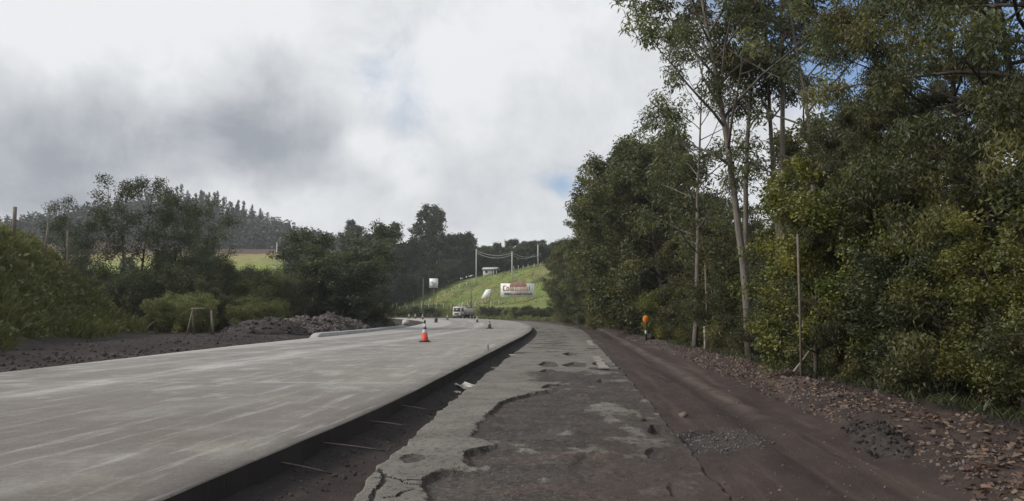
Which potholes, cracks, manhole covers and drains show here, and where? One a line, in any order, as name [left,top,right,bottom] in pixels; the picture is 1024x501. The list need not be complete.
pothole [462,445,505,468]
pothole [399,453,426,463]
pothole [665,482,682,498]
pothole [647,424,667,435]
pothole [420,471,553,501]
pothole [476,388,589,442]
pothole [644,447,665,459]
crack [367,468,421,501]
